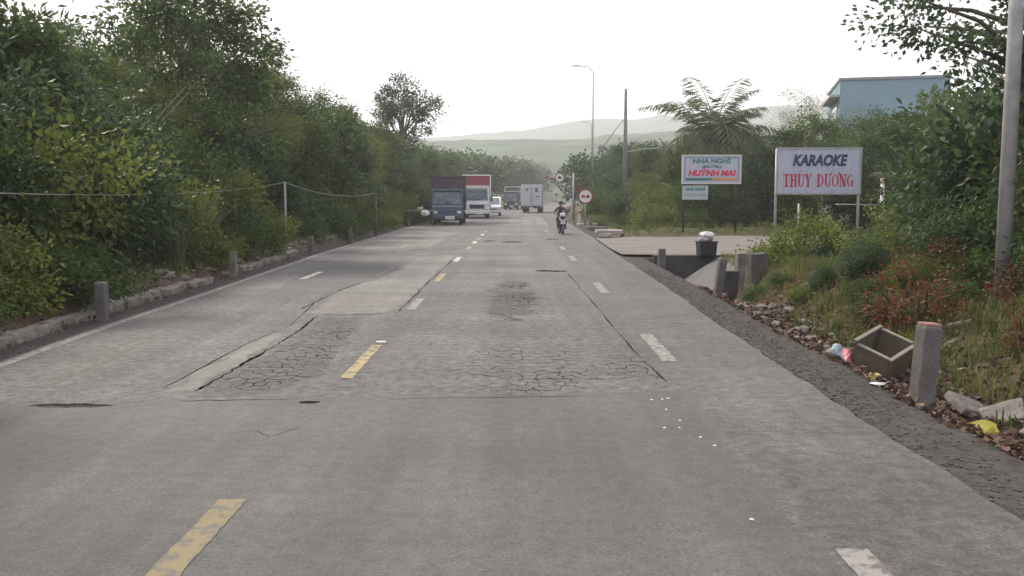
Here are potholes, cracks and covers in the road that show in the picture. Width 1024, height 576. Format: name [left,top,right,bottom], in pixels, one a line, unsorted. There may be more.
crack [484,272,542,321]
crack [195,314,367,393]
